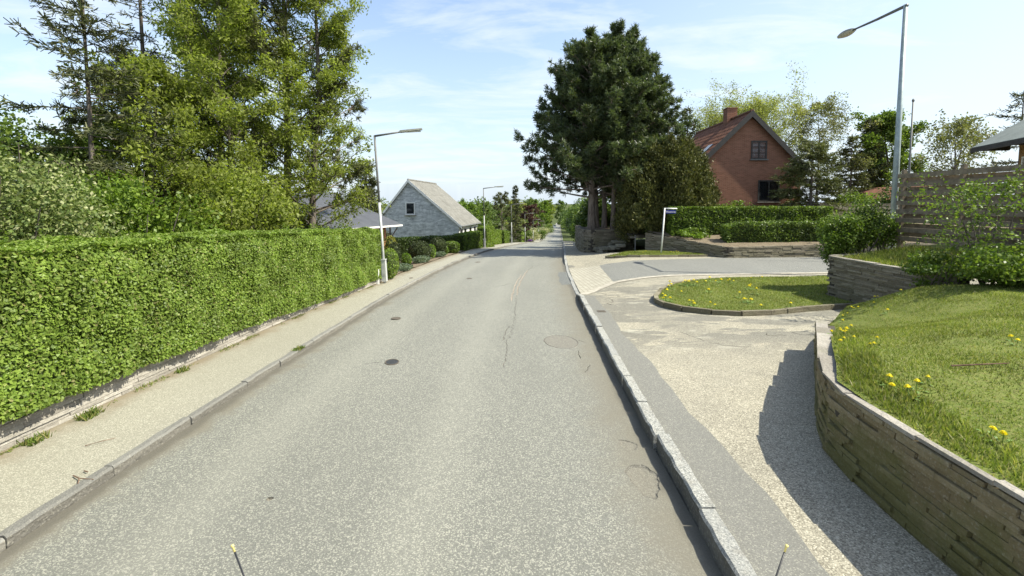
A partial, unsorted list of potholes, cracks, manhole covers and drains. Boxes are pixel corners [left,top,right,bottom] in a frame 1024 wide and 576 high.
crack [502,265,534,366]
